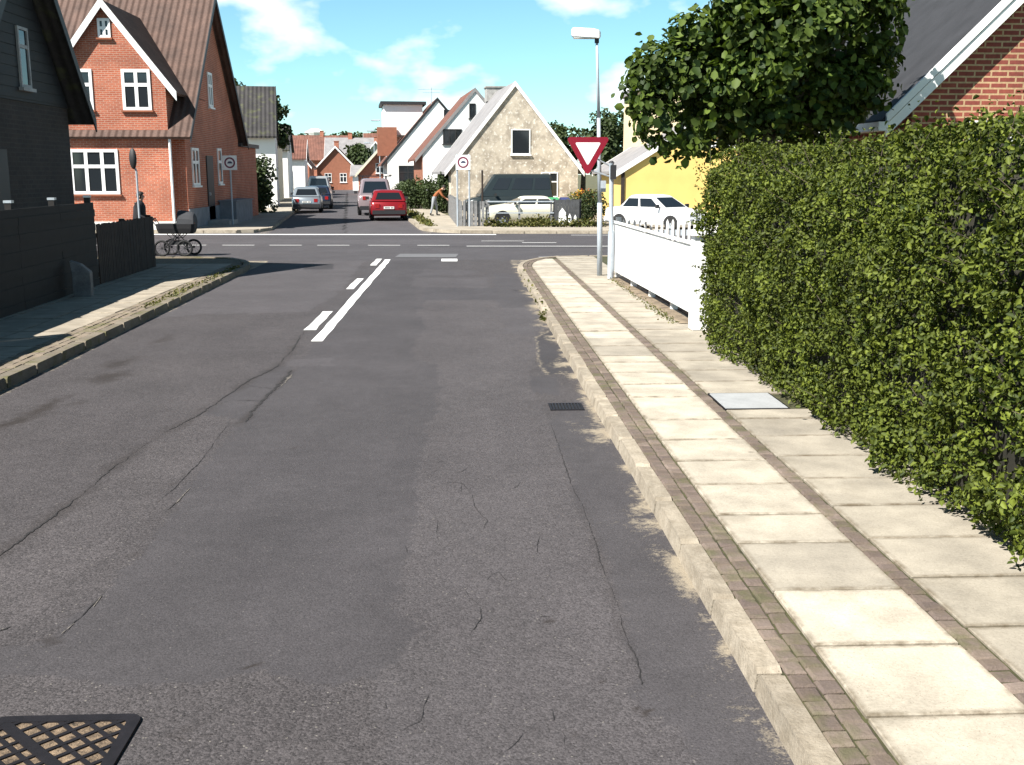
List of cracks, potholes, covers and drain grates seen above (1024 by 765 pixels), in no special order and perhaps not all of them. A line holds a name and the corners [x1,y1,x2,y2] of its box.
crack [385,461,565,755]
crack [221,370,293,422]
crack [19,427,226,634]
utility cover [708,393,791,411]
drain grate [548,403,584,411]
